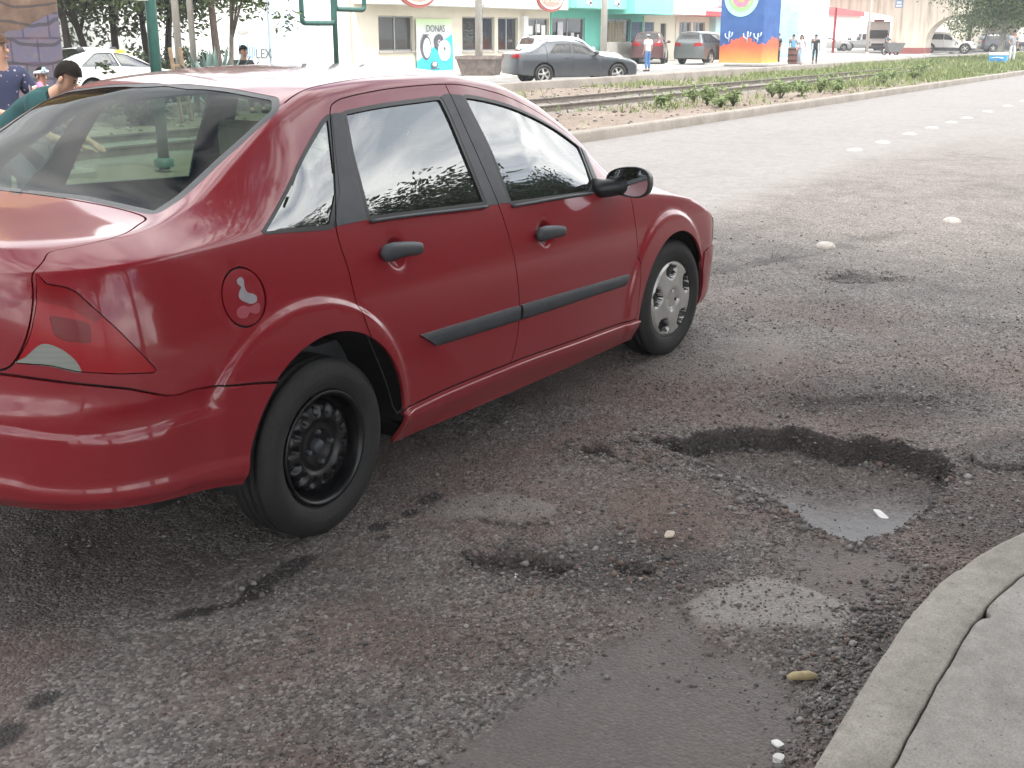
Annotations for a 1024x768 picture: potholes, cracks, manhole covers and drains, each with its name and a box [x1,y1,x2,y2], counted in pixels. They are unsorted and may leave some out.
pothole [827,272,900,284]
pothole [455,546,585,580]
pothole [607,559,667,580]
pothole [642,425,957,541]
pothole [572,442,615,456]
